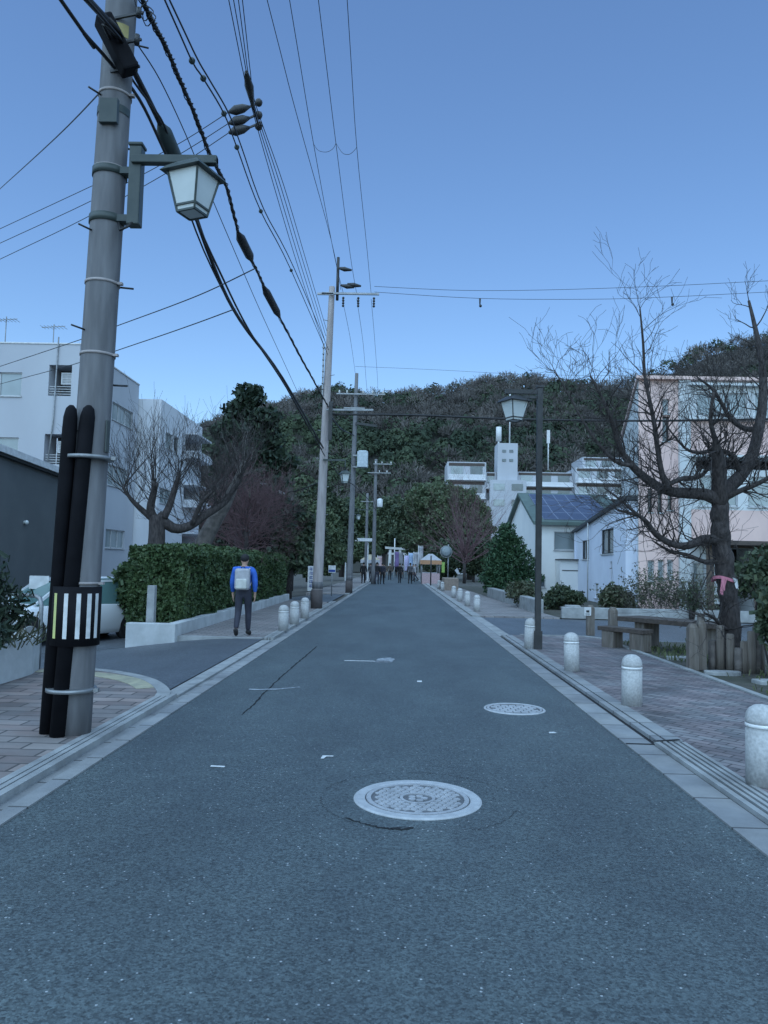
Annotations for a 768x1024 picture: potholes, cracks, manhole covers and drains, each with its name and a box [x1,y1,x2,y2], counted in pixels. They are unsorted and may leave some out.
crack [243,646,317,714]
crack [320,772,516,830]
manhole cover [484,703,546,715]
manhole cover [354,780,482,821]
